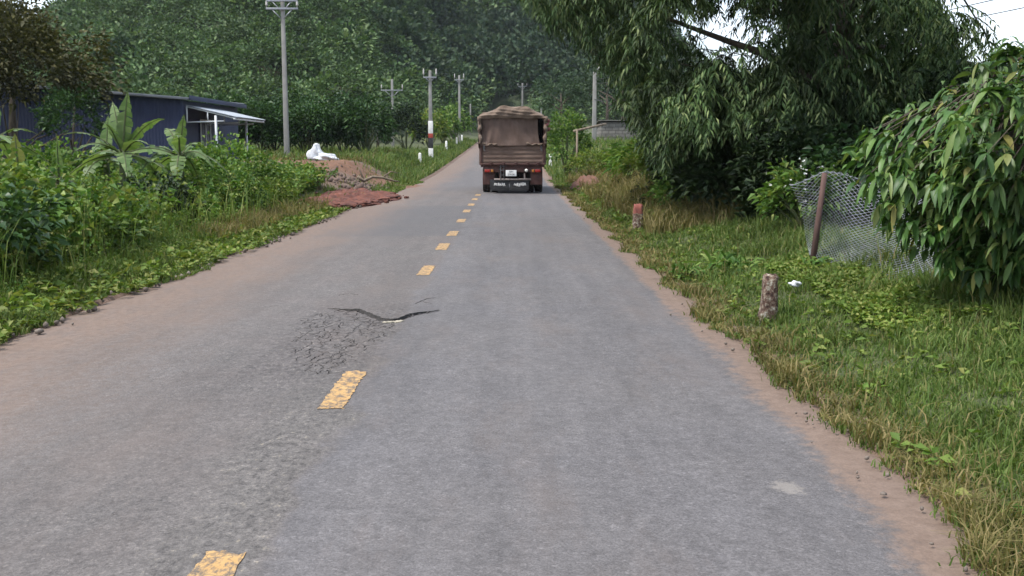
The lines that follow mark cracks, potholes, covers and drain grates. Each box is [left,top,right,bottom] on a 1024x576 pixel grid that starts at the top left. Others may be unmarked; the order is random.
crack [292,294,440,374]
